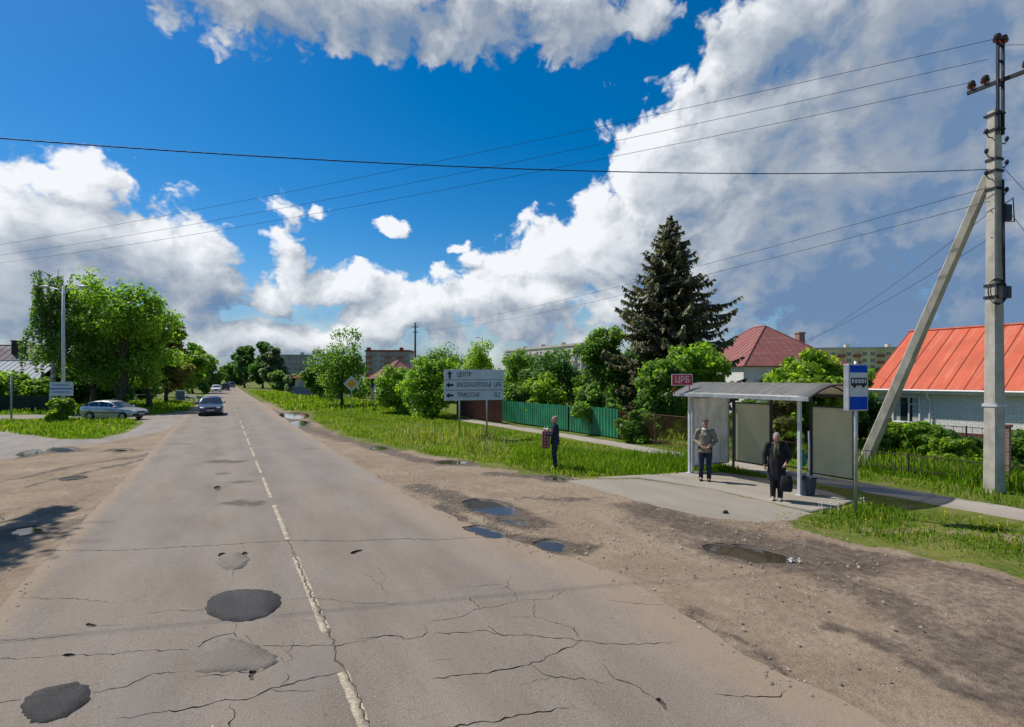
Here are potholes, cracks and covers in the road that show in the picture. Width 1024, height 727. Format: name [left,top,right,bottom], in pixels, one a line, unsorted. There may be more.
crack [718,690,787,698]
pothole [532,539,569,553]
pothole [462,498,517,517]
pothole [462,525,506,539]
crack [2,537,673,727]
